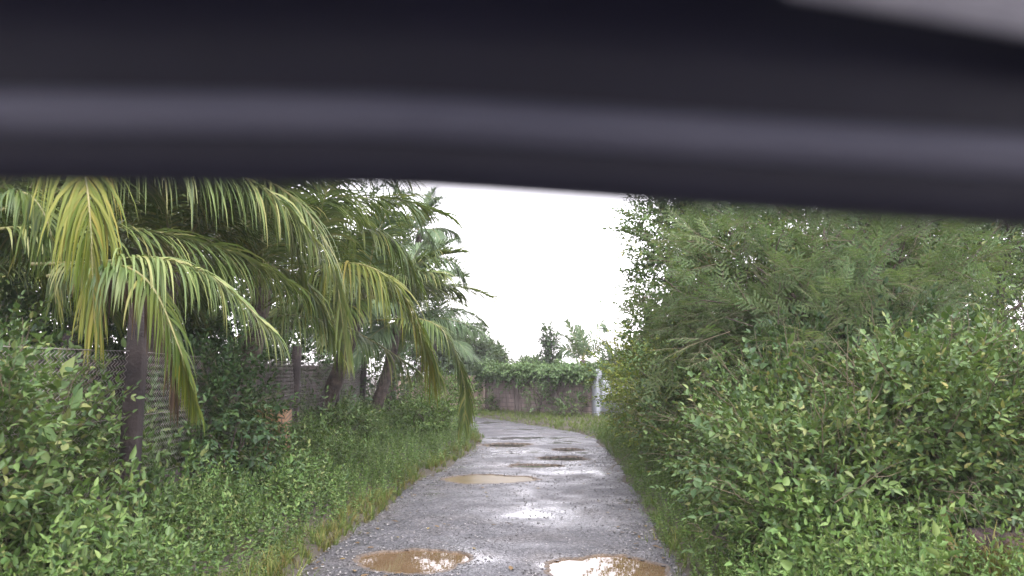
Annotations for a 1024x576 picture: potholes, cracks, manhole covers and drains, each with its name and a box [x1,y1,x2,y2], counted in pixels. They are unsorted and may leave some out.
pothole [351,548,475,575]
pothole [441,474,543,484]
pothole [543,554,672,576]
